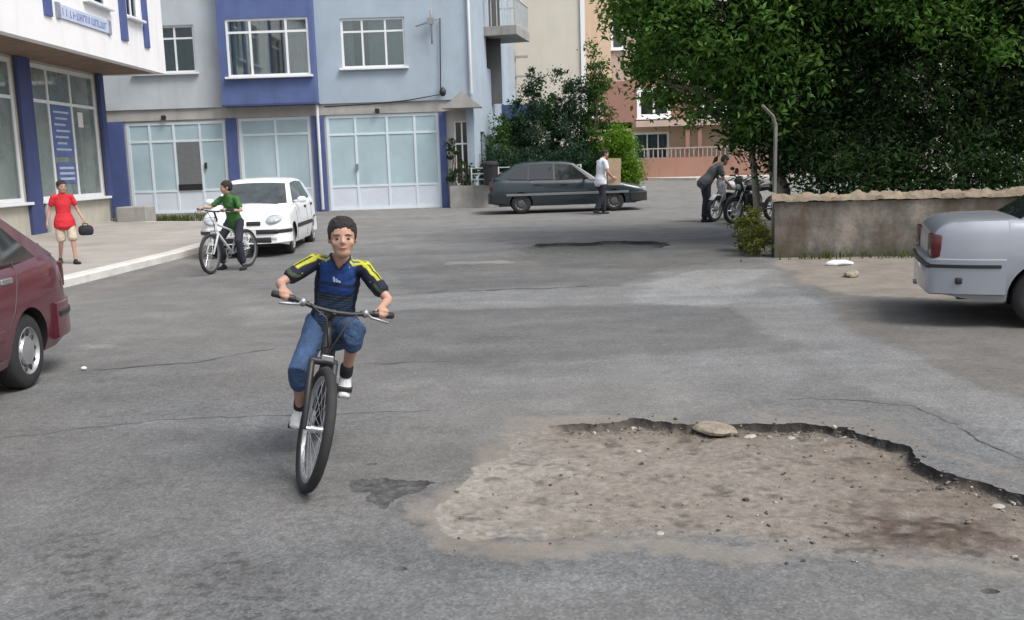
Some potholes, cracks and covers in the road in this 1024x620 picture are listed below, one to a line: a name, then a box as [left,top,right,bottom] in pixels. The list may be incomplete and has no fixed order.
crack [797,398,1024,460]
crack [102,349,270,370]
crack [6,410,424,438]
pothole [520,241,670,257]
pothole [433,418,1024,573]
